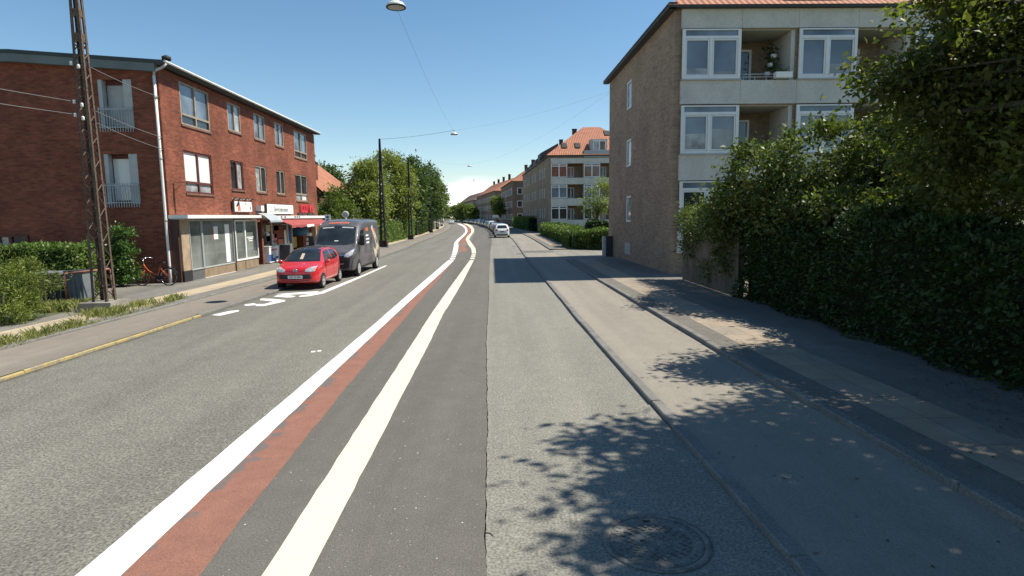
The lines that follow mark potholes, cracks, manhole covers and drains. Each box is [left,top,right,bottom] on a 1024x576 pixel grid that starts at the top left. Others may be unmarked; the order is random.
manhole cover [601,513,714,573]
